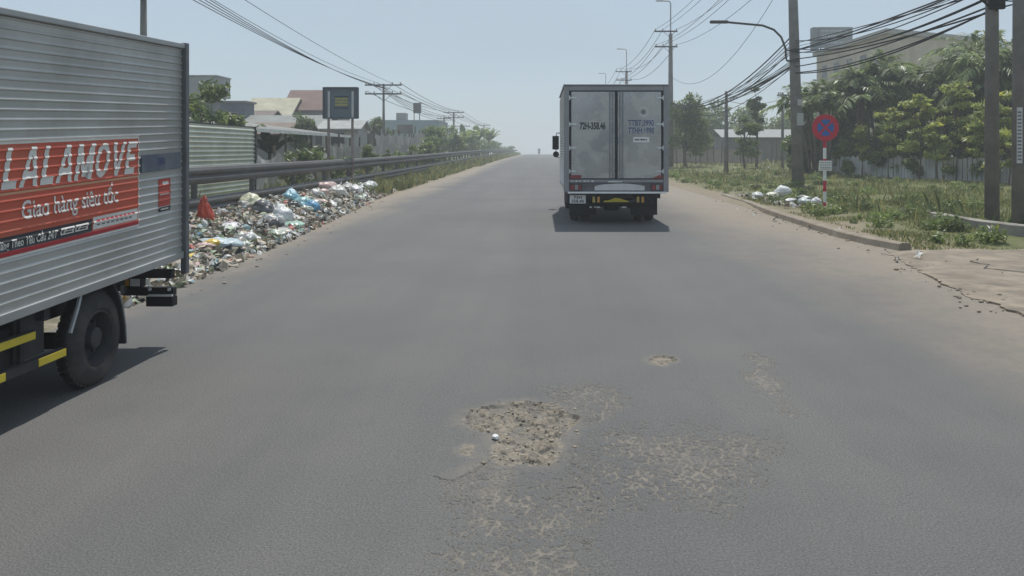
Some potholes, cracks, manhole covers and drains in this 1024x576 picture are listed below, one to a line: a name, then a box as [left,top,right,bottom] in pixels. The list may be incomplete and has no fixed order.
crack [417,350,813,576]
pothole [460,400,582,467]
pothole [648,355,679,366]
